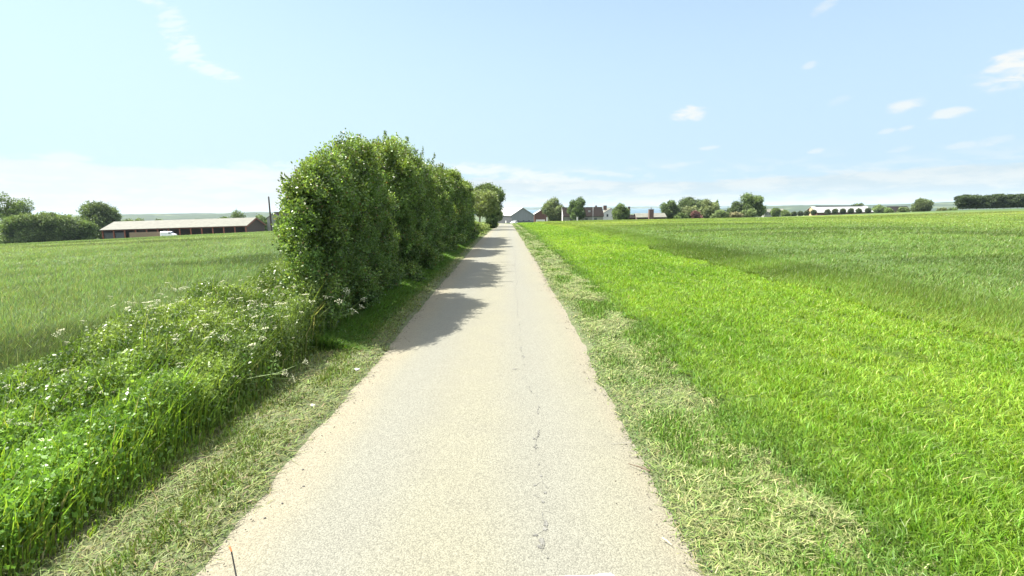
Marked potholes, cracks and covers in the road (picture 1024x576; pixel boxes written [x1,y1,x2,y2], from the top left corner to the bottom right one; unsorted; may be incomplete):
crack [510,238,551,558]
